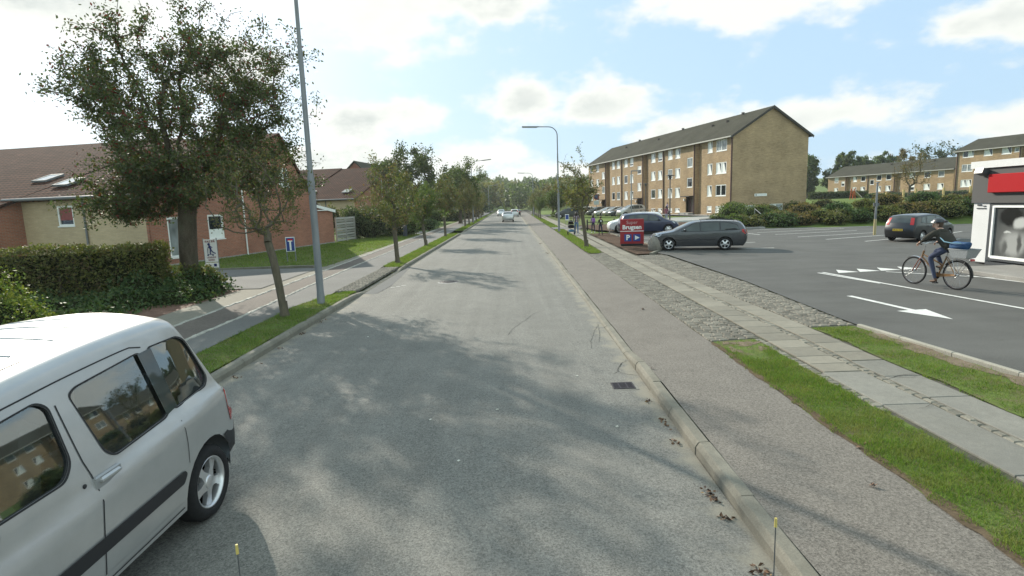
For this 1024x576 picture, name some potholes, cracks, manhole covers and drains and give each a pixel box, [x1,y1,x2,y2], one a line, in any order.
drain grate [610,381,639,390]
